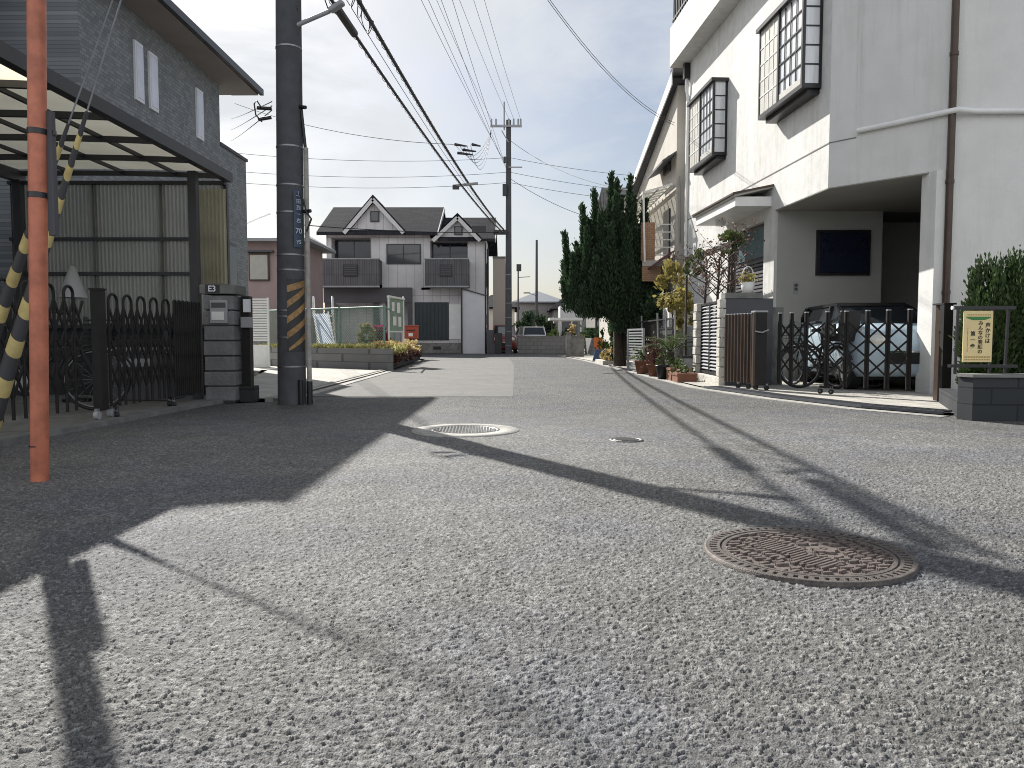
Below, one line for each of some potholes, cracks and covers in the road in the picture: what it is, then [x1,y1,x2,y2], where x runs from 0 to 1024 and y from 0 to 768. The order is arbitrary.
manhole cover [411,424,519,437]
manhole cover [704,527,920,588]
